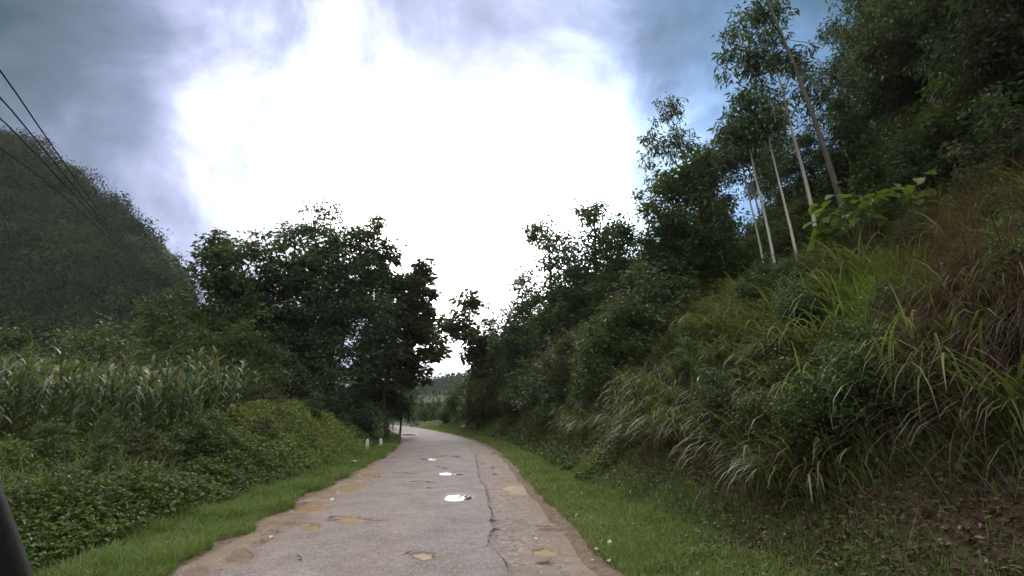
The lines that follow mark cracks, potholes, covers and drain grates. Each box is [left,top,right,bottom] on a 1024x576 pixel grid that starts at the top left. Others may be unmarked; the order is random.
pothole [442,493,475,502]
crack [391,455,511,576]
